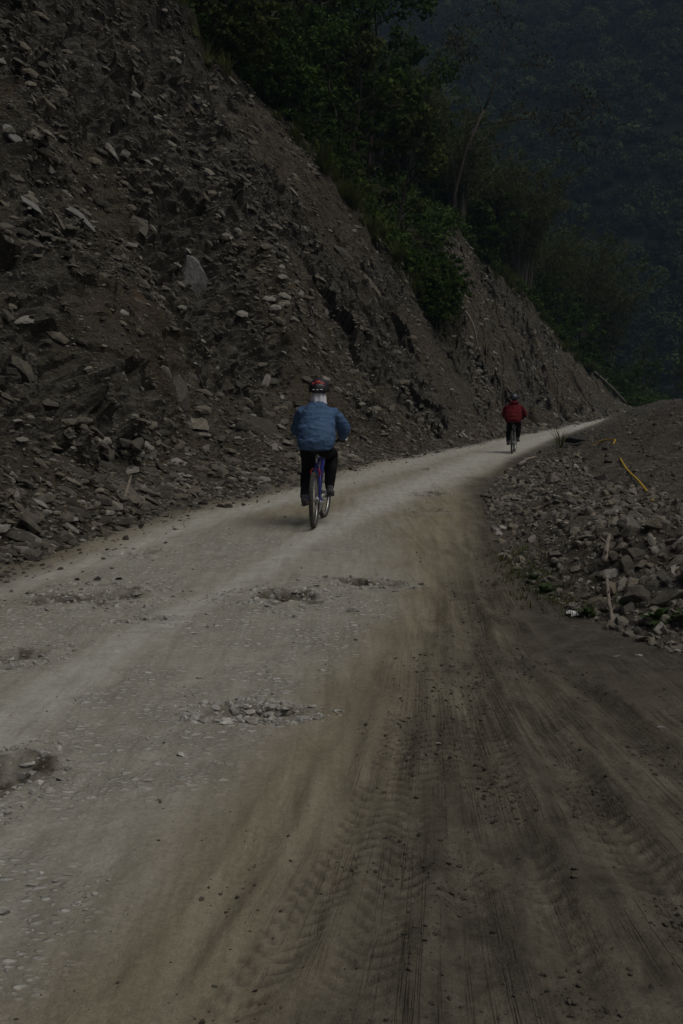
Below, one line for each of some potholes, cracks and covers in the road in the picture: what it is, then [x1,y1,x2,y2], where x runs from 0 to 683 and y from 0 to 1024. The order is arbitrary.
pothole [224,588,334,606]
pothole [0,749,65,810]
pothole [0,646,65,670]
pothole [318,578,409,589]
pothole [22,584,168,608]
pothole [190,700,320,724]
